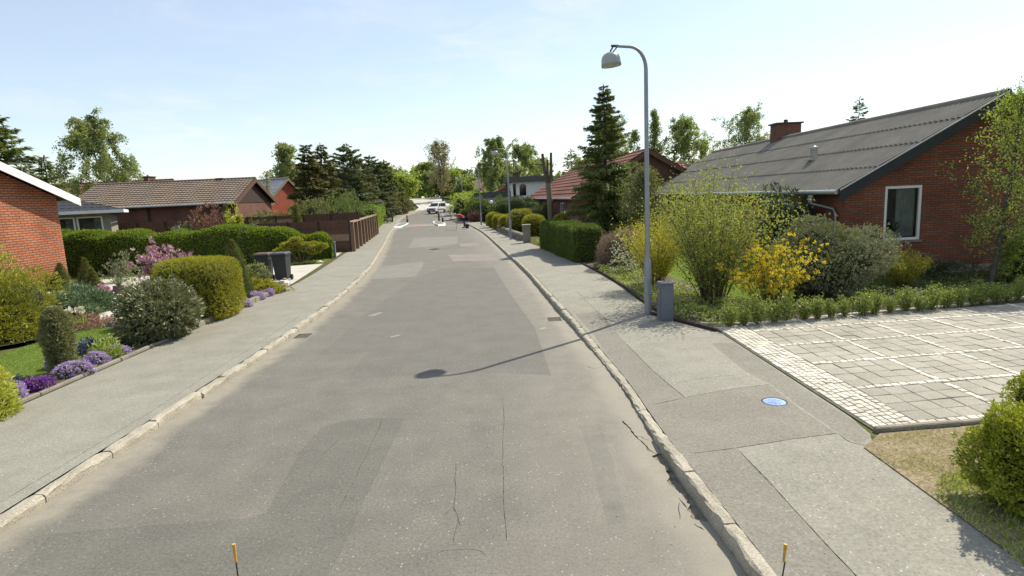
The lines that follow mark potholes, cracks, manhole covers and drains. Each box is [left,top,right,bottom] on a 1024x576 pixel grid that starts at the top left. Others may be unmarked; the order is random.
manhole cover [761,397,788,406]
crack [622,421,656,454]
crack [437,468,484,554]
crack [339,422,381,510]
